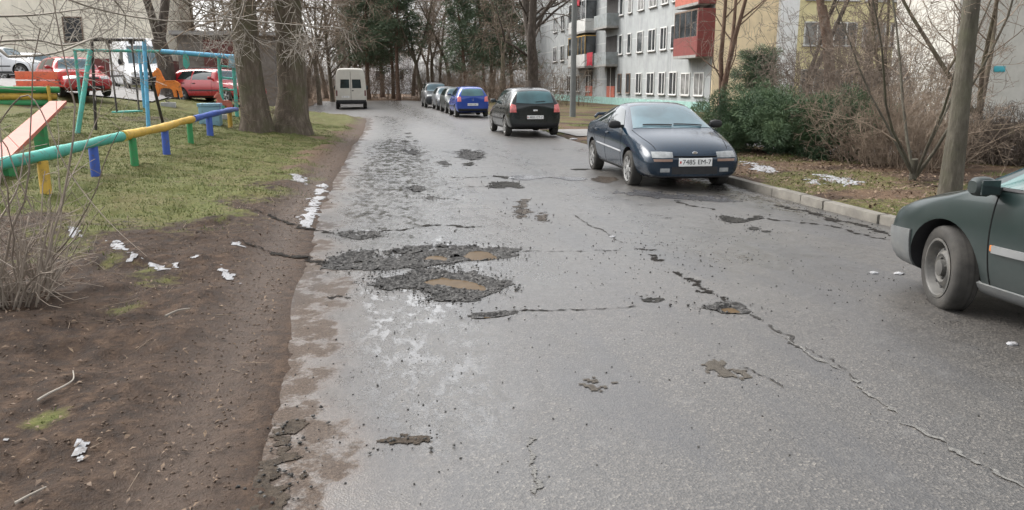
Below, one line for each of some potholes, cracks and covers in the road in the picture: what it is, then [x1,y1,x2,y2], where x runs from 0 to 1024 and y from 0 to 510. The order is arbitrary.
pothole [701,359,752,380]
crack [574,214,727,302]
crack [240,238,326,265]
pothole [579,376,618,392]
pothole [503,198,543,219]
pothole [481,181,530,189]
crack [526,436,544,493]
pothole [311,241,531,273]
pothole [354,264,524,306]
pothole [454,149,486,161]
